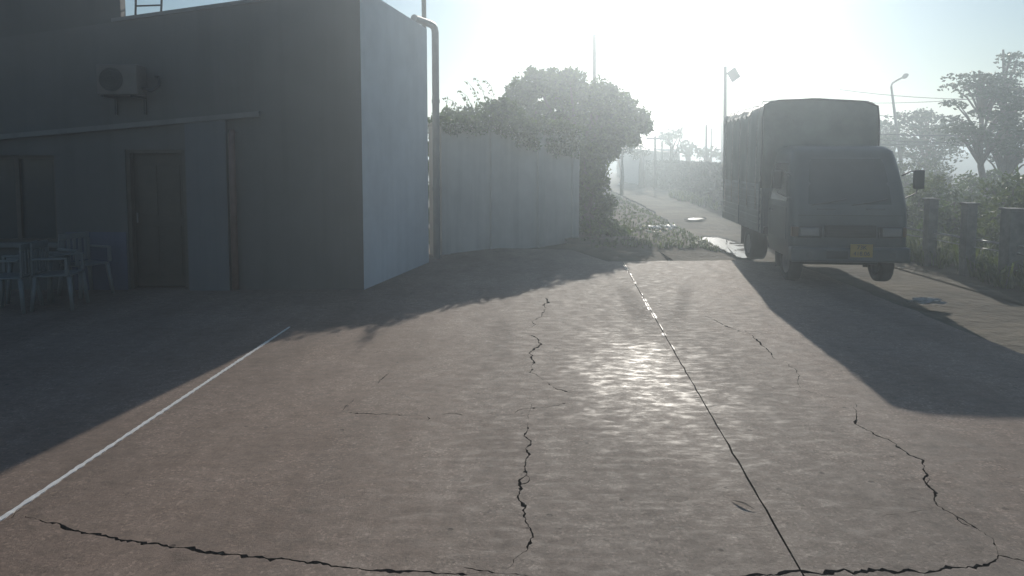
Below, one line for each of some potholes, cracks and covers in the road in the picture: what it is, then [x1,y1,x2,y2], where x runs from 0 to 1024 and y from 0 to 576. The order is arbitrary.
crack [11,321,1023,576]
